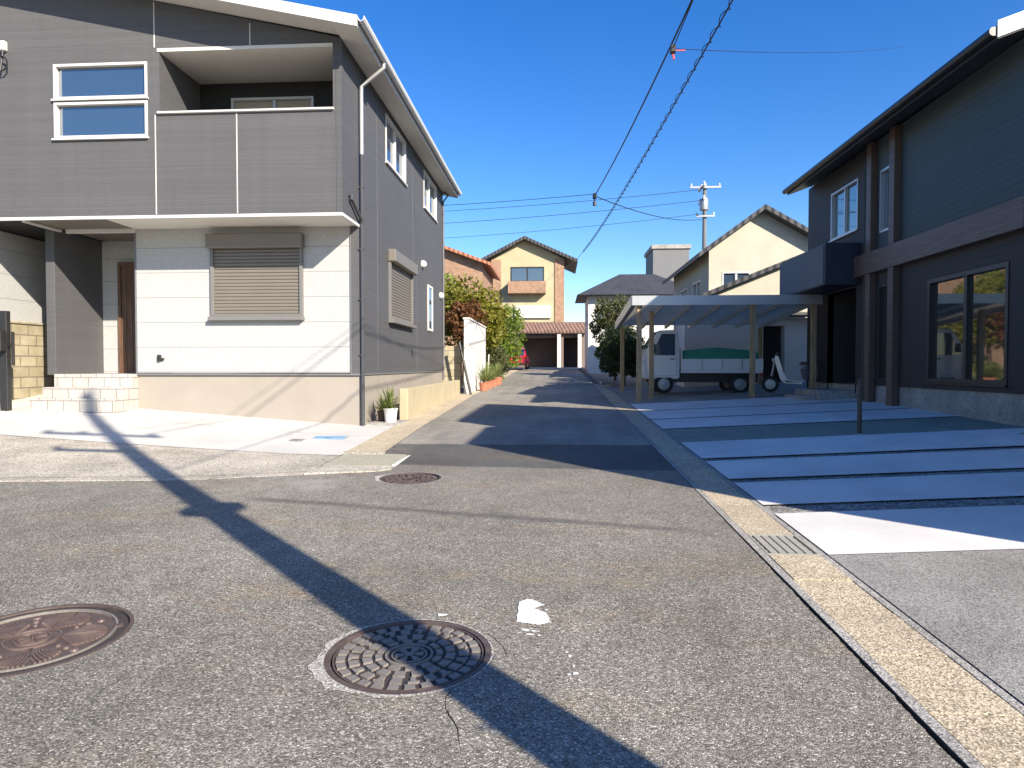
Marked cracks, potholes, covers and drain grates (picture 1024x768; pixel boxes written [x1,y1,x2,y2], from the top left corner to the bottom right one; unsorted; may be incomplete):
crack [445,689,460,746]
manhole cover [375,472,443,484]
manhole cover [0,603,135,678]
manhole cover [308,619,494,698]
drain grate [747,534,821,556]
